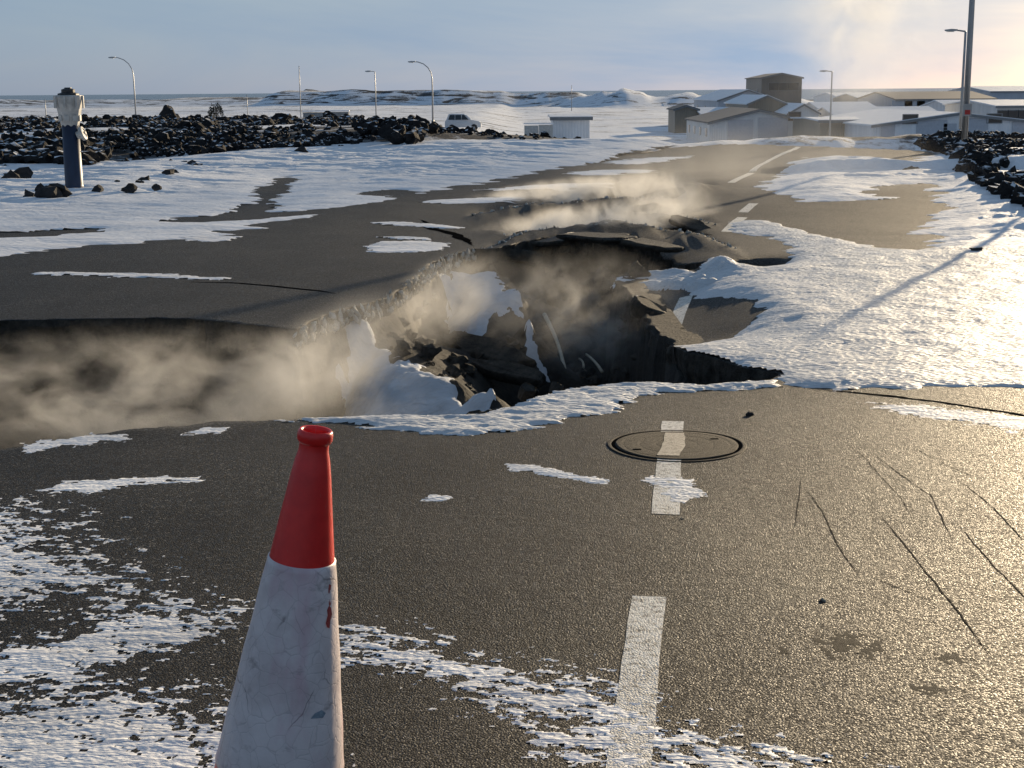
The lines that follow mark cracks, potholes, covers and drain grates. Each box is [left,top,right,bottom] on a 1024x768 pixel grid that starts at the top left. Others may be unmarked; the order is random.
crack [805,388,1024,416]
crack [793,432,1024,669]
manhole cover [607,430,747,462]
crack [210,282,336,294]
